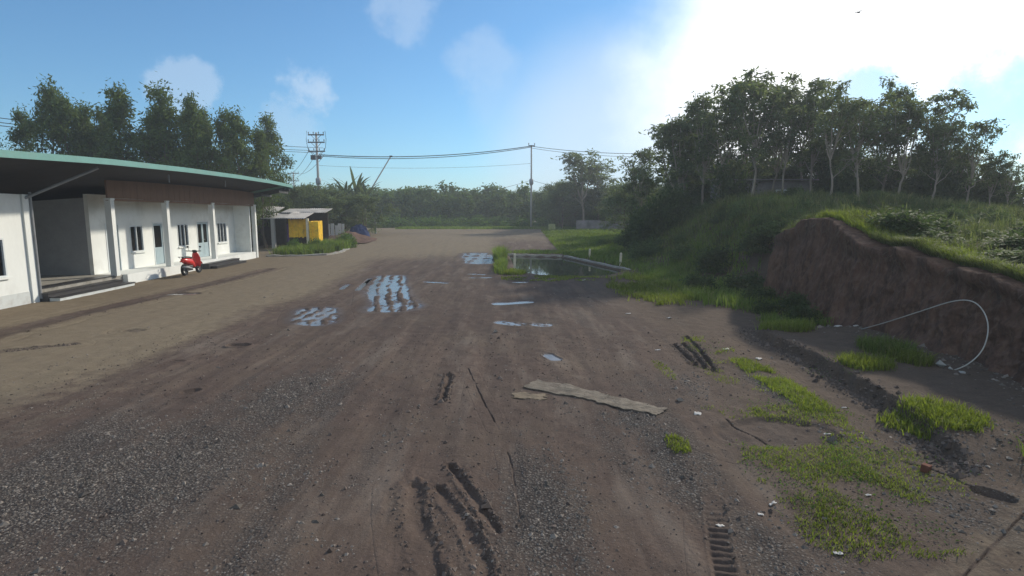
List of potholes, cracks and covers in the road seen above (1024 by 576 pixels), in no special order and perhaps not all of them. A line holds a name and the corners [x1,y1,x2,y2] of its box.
crack [714,415,791,452]
crack [458,366,539,527]
